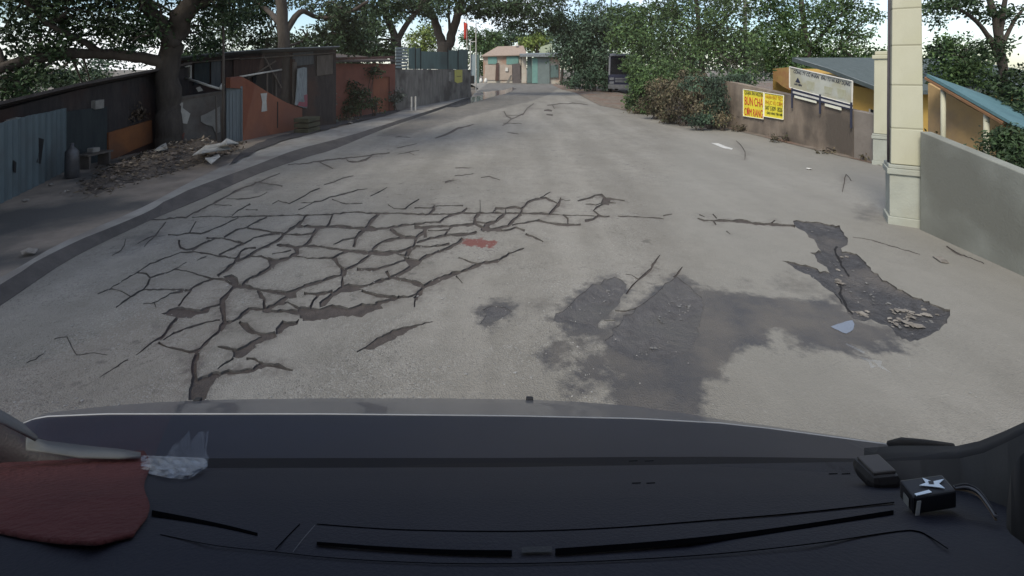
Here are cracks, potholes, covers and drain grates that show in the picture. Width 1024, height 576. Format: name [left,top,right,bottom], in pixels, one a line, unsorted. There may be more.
pothole [784,220,950,342]
crack [502,102,588,134]
crack [697,214,795,234]
crack [27,136,672,400]
